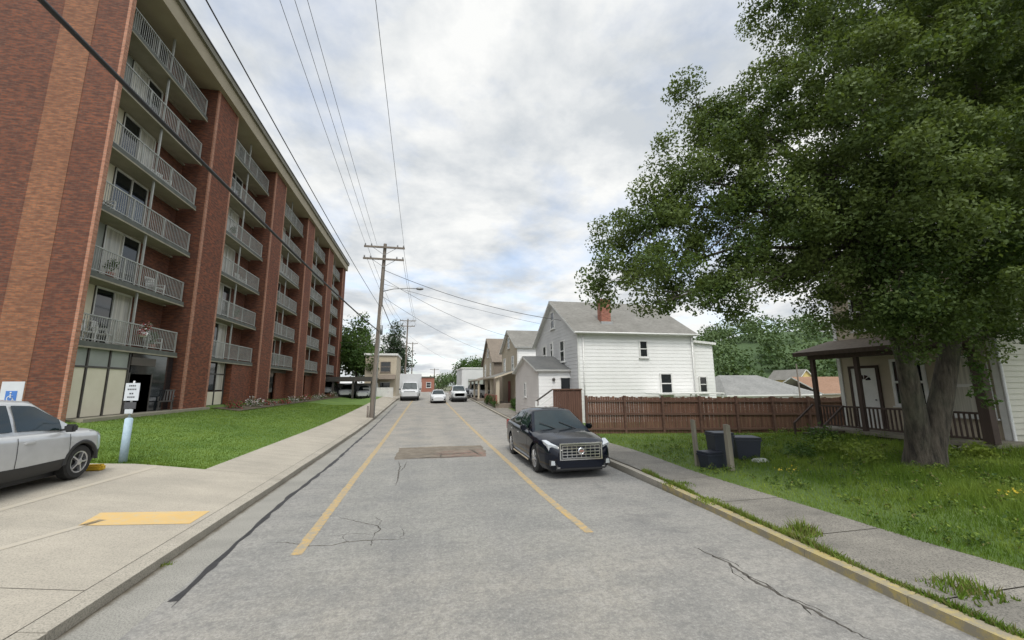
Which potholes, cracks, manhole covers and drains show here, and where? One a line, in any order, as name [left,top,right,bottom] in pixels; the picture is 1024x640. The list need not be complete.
crack [275,515,412,546]
crack [698,548,871,640]
